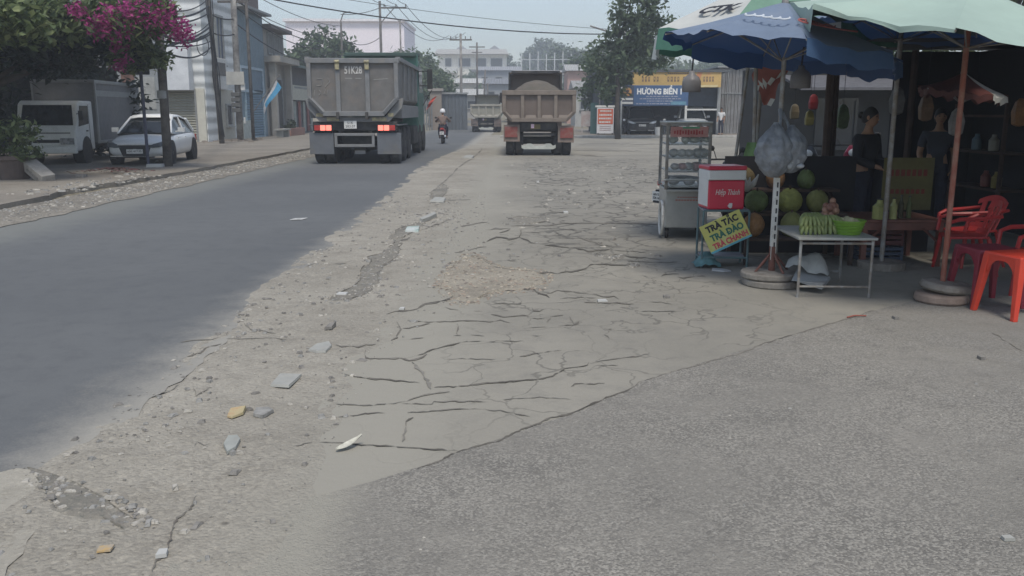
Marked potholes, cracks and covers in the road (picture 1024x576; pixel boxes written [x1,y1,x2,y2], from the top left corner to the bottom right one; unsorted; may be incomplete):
pothole [385,222,425,240]
pothole [322,264,384,304]
crack [183,323,280,358]
pothole [429,184,449,198]
pothole [13,464,160,531]
pothole [362,236,403,268]
crack [152,495,197,570]
crack [336,209,706,468]
